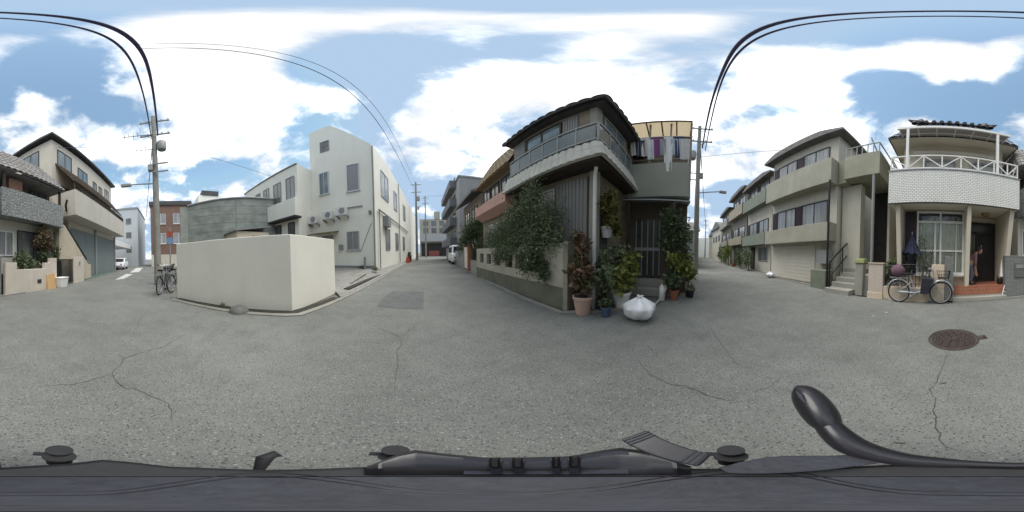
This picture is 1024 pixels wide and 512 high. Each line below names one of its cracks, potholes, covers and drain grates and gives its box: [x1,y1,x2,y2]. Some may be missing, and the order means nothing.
manhole cover [928,329,988,351]
crack [928,356,957,451]
crack [637,345,738,402]
crack [38,317,175,420]
